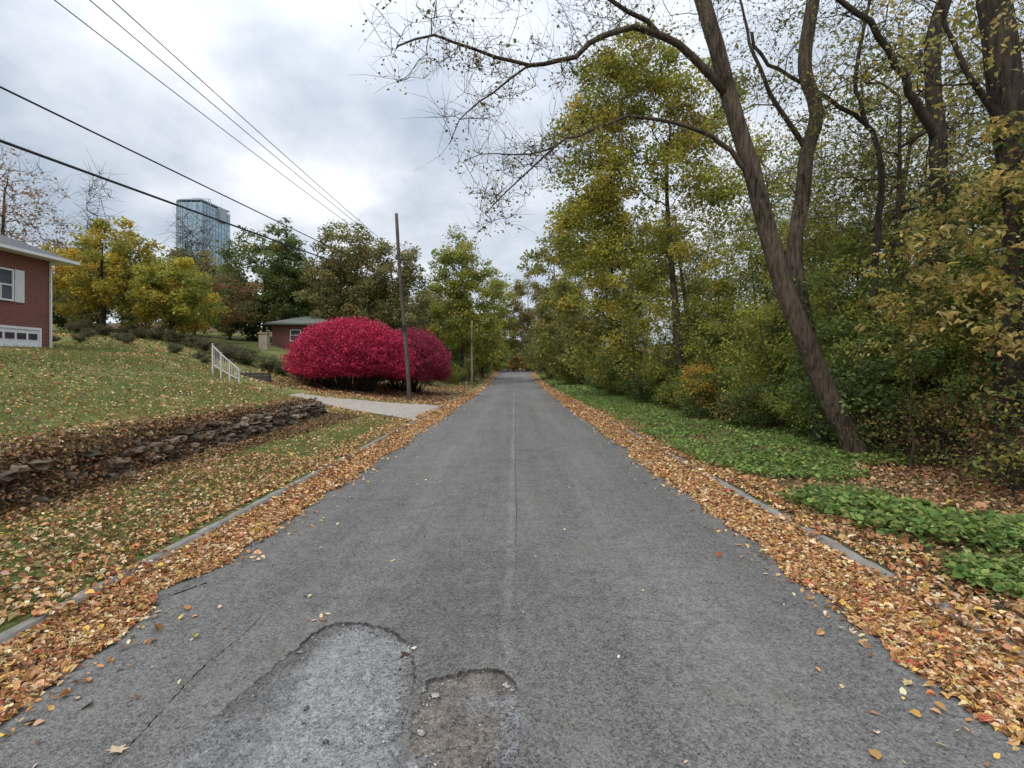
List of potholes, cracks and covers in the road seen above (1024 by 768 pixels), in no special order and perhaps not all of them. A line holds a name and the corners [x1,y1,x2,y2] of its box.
pothole [407,668,521,768]
crack [103,615,262,767]
pothole [177,622,417,768]
